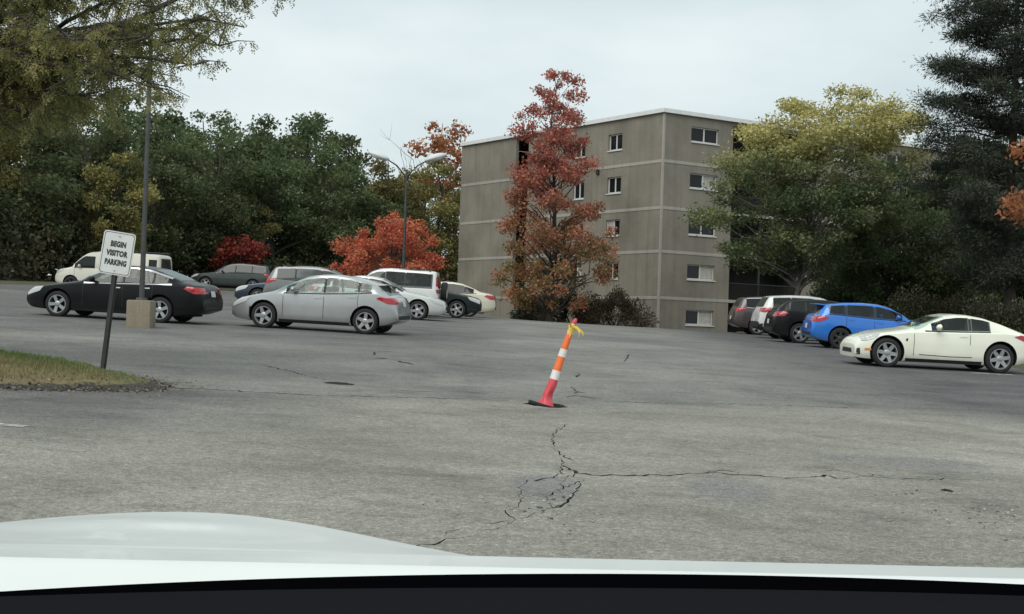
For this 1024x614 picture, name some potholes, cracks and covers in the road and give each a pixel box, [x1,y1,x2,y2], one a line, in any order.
crack [416,425,962,546]
